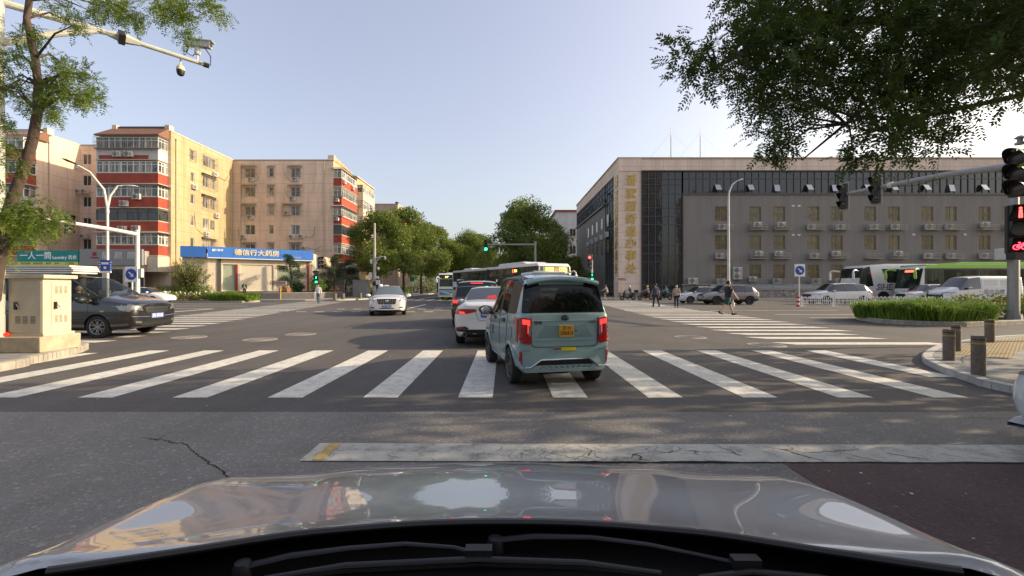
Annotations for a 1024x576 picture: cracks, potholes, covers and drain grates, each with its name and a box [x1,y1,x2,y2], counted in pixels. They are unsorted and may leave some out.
crack [134,433,229,477]
